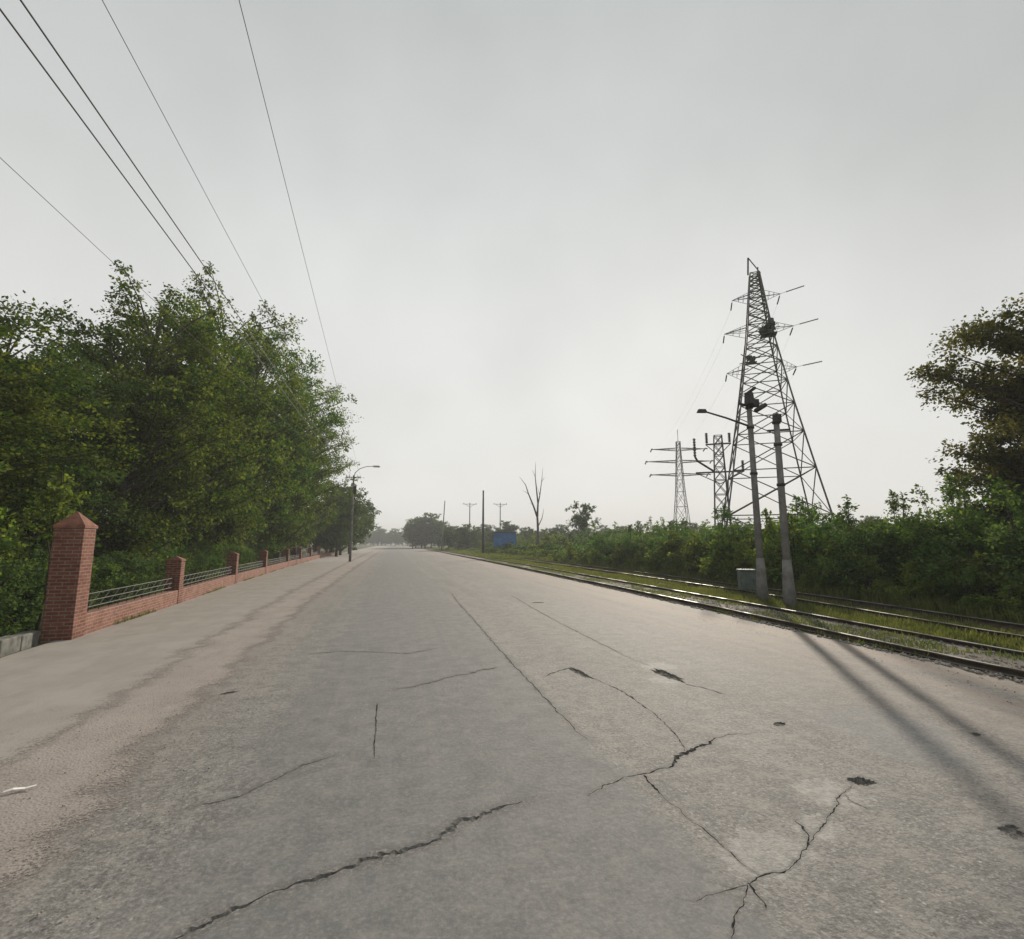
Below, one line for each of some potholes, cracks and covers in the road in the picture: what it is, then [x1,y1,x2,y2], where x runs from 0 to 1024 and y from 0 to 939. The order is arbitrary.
crack [175,758,522,939]
pothole [847,776,877,786]
pothole [650,668,685,683]
pothole [997,824,1024,839]
crack [399,594,867,938]
